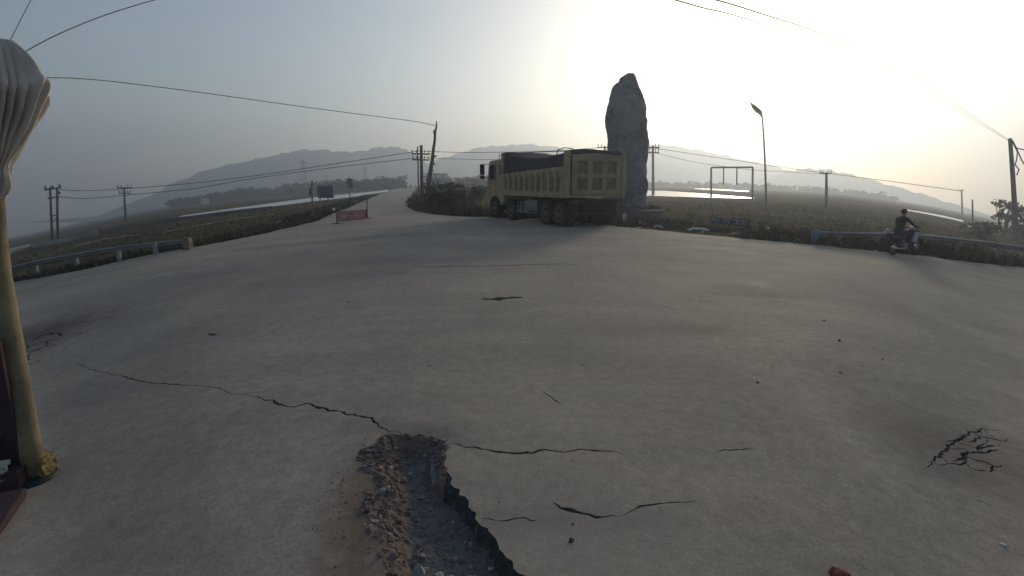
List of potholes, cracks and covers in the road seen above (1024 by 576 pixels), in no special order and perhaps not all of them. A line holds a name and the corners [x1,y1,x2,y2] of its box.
pothole [354,434,526,576]
crack [82,365,402,436]
crack [481,501,694,521]
crack [447,443,622,454]
crack [25,332,62,365]
crack [925,428,1007,472]
